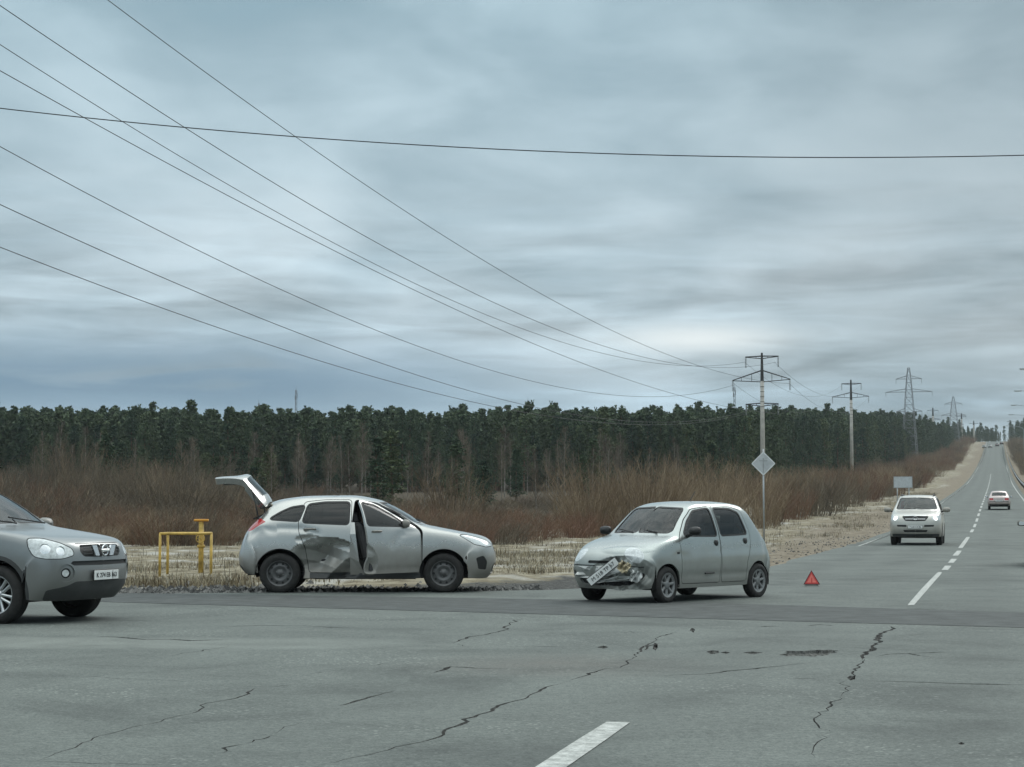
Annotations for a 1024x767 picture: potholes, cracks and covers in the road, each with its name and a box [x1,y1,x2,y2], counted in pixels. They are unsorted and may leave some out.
crack [326,632,672,764]
crack [454,619,550,647]
crack [664,663,813,679]
crack [13,689,253,765]
crack [811,627,937,755]
